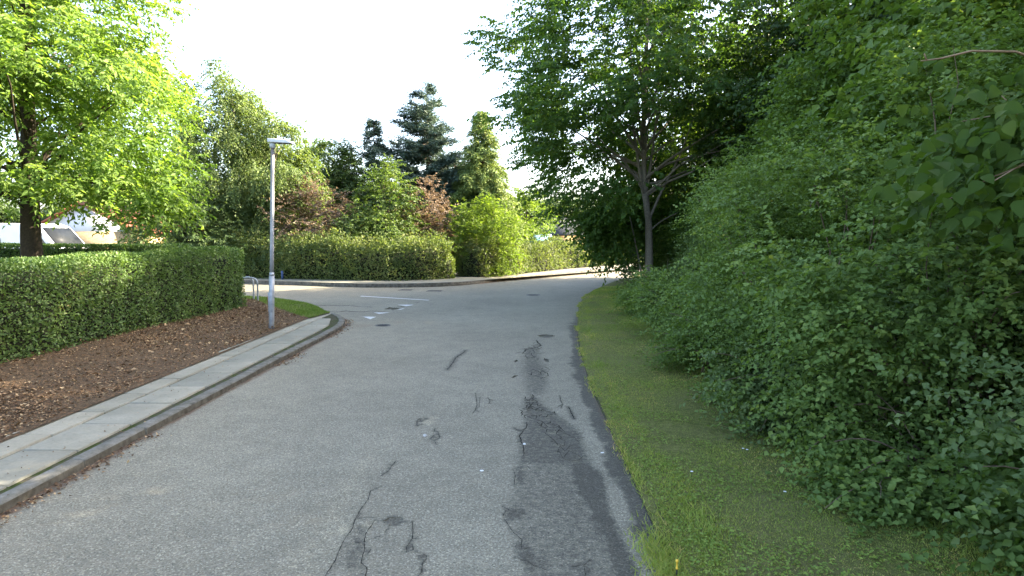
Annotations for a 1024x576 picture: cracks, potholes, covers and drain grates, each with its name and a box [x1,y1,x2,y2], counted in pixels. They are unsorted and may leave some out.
crack [503,508,546,570]
crack [514,341,583,484]
crack [325,486,390,576]
